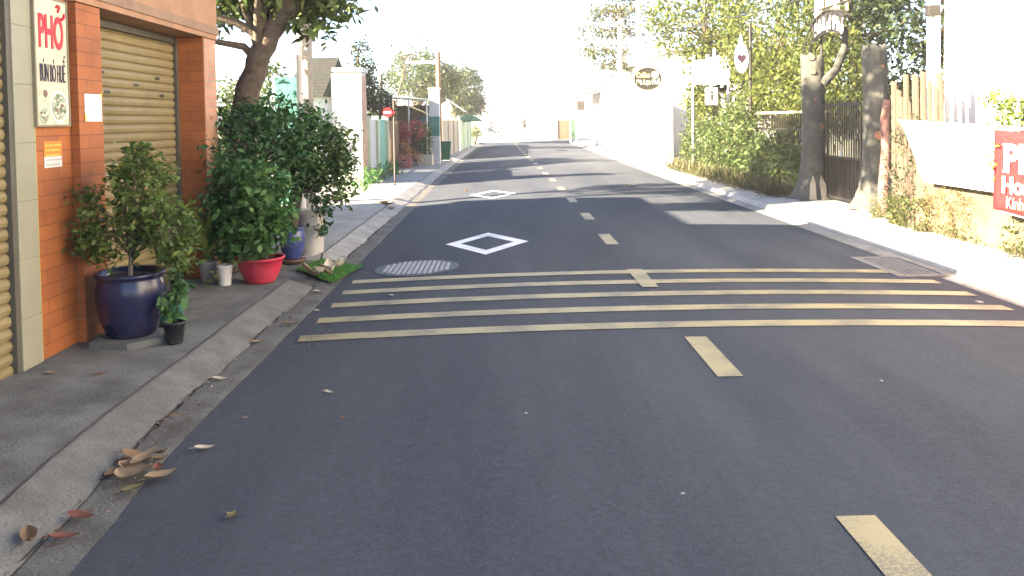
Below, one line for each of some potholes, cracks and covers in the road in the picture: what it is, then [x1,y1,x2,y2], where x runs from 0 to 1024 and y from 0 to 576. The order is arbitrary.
drain grate [850,256,954,278]
manhole cover [375,260,459,276]
